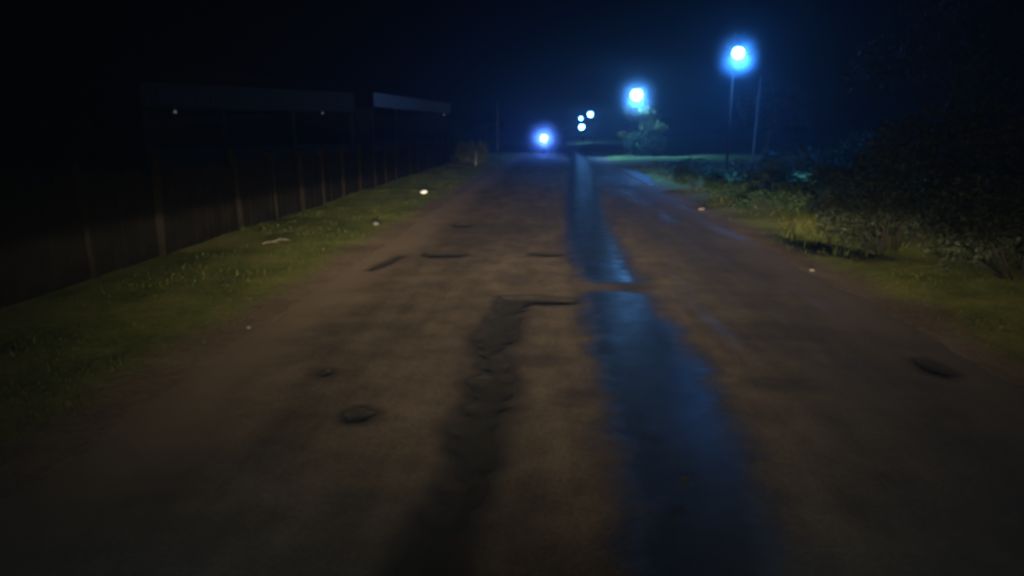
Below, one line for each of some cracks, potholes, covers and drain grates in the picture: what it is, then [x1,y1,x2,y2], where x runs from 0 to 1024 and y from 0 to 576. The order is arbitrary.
pothole [914,360,954,378]
pothole [393,296,578,576]
pothole [343,408,377,423]
